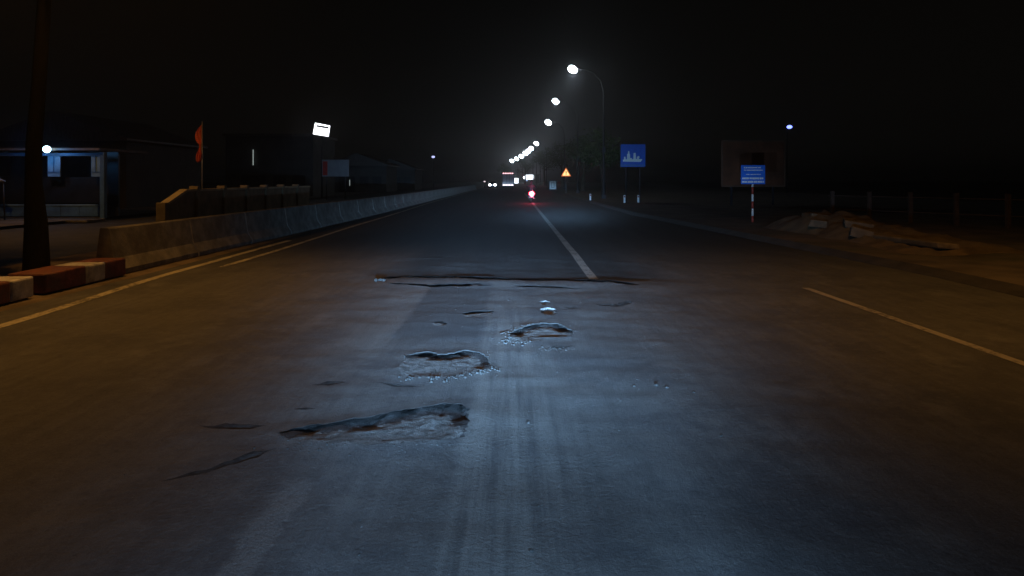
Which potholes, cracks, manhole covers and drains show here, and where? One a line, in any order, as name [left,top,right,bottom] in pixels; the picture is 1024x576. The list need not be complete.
pothole [510,323,573,342]
pothole [278,403,470,445]
crack [164,448,275,481]
pothole [398,350,490,377]
pothole [541,307,558,315]
